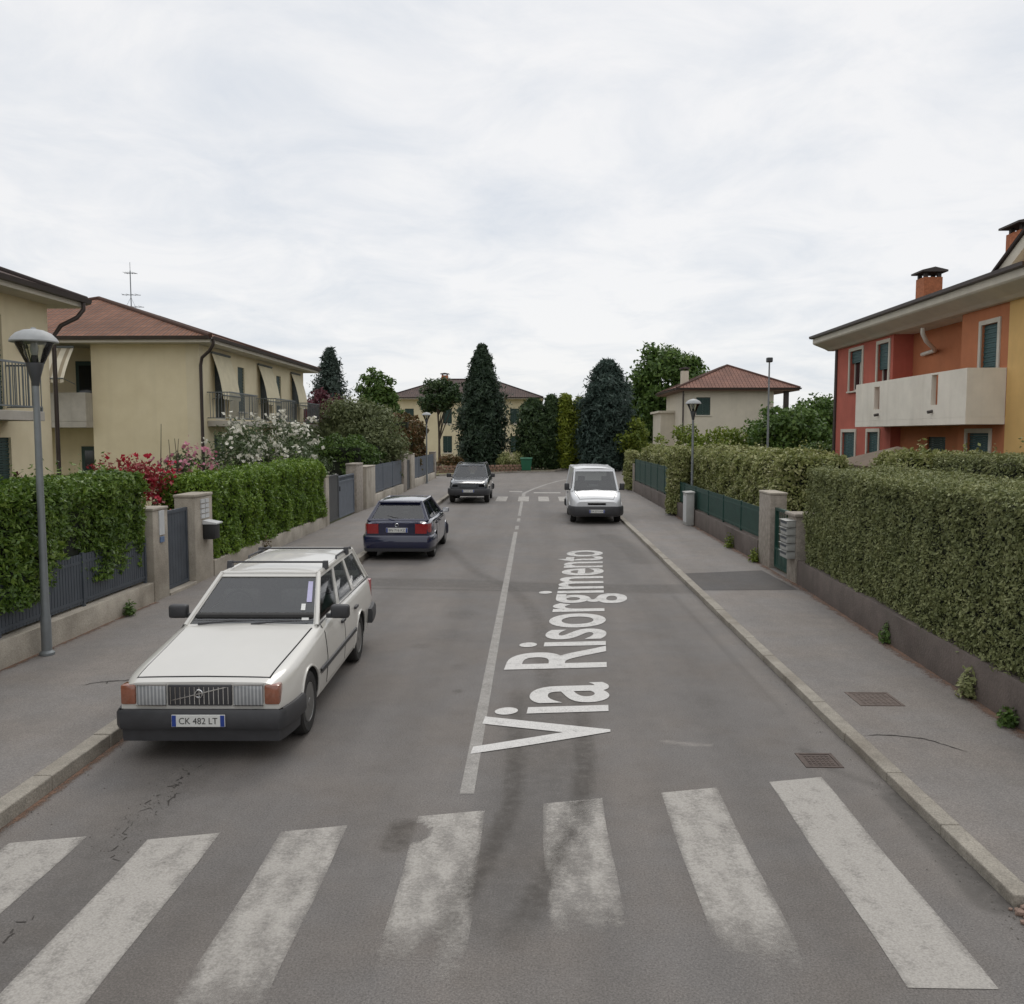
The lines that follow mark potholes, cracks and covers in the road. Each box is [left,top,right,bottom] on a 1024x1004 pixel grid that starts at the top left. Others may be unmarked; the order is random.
crack [110,765,202,861]
